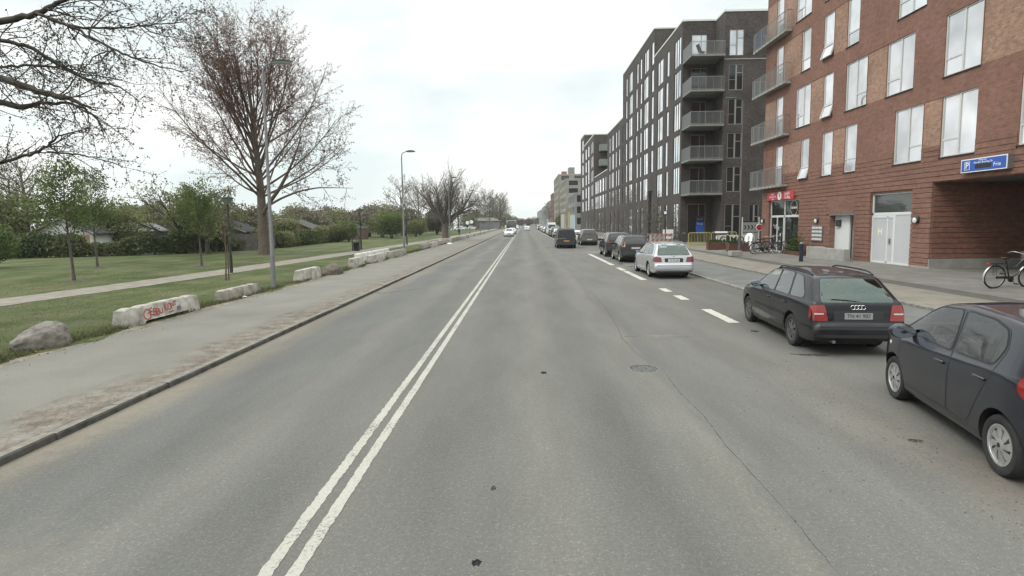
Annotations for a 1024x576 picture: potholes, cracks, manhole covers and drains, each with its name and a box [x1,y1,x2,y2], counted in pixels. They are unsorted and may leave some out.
manhole cover [628,365,660,373]
crack [663,370,841,576]
